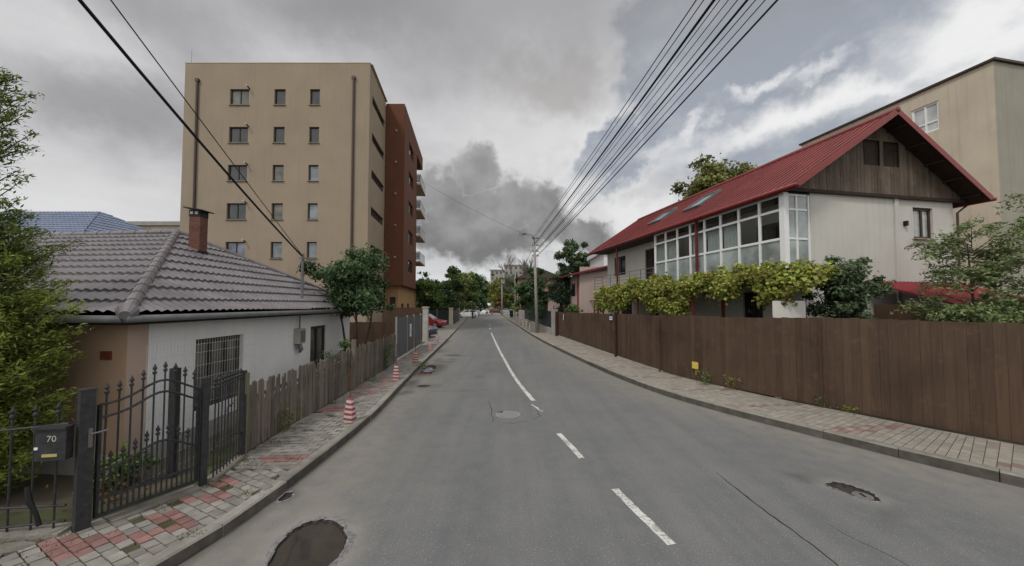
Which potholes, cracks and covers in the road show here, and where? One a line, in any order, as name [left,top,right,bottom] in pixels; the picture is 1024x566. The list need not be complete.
crack [717,473,908,566]
pothole [276,490,295,503]
pothole [262,515,357,566]
manhole cover [493,410,523,419]
pothole [822,480,883,503]
